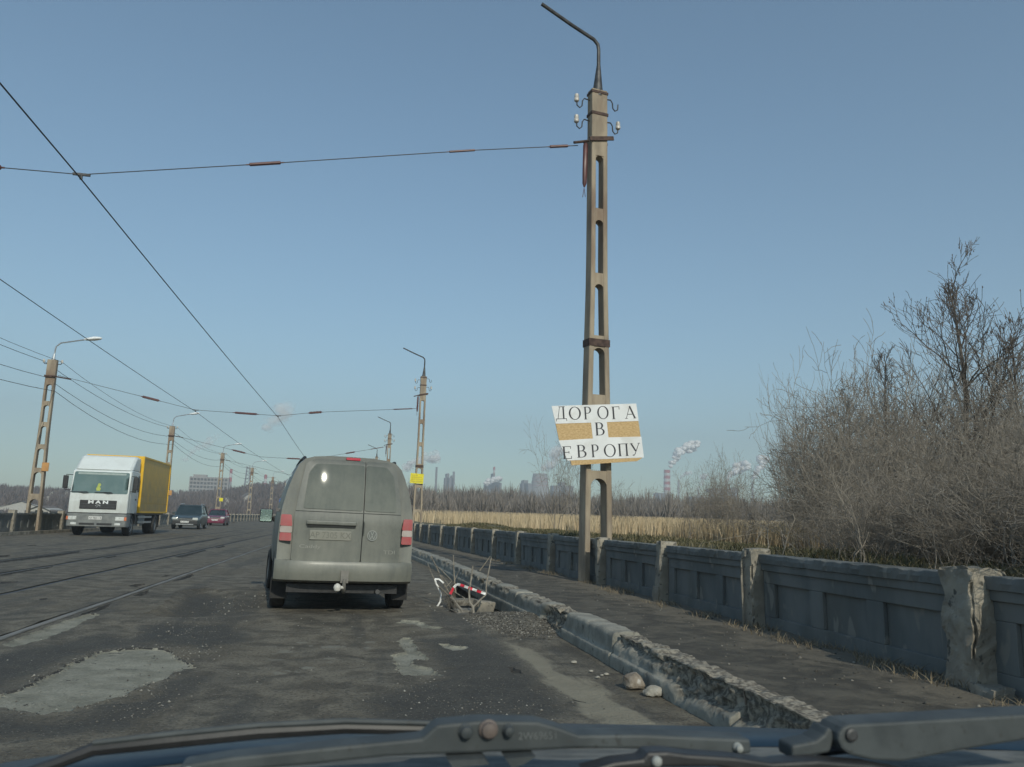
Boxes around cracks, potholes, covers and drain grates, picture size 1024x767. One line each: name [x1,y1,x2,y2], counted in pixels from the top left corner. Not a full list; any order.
pothole [444,583,500,612]
